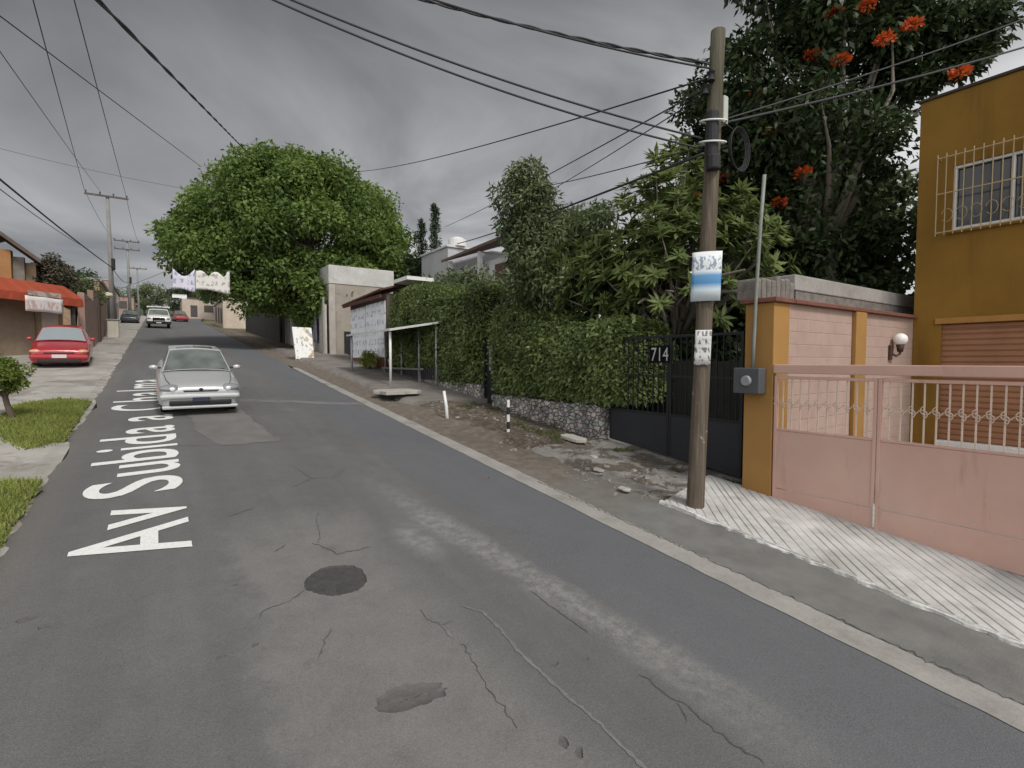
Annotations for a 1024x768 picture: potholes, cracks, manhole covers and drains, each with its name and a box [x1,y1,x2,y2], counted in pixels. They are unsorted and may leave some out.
crack [460,643,517,727]
pothole [558,735,569,749]
crack [641,675,764,763]
